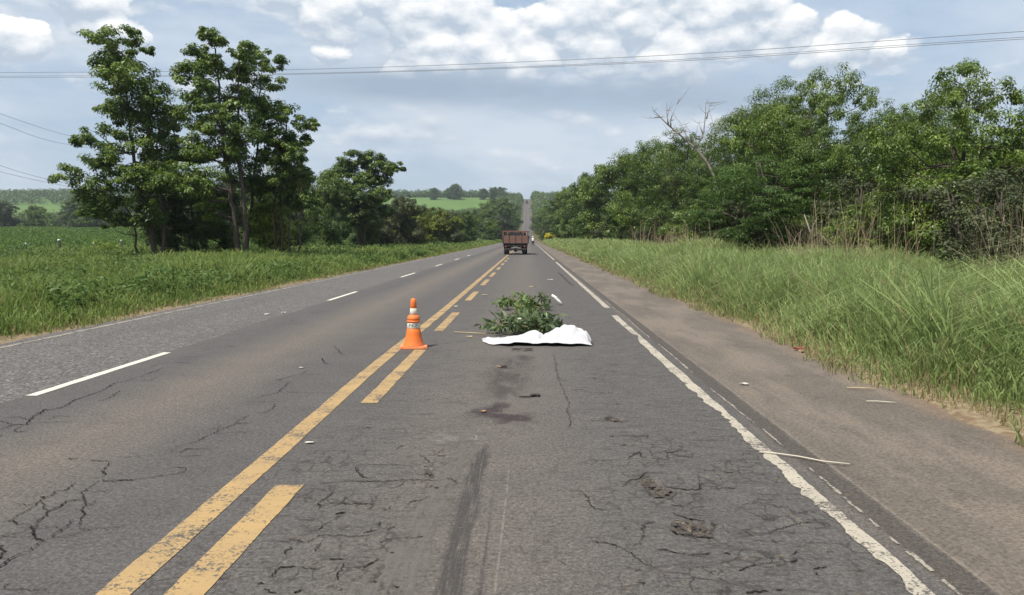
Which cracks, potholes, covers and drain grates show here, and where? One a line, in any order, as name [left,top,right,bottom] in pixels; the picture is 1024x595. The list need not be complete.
pothole [641,475,677,499]
pothole [670,520,713,537]
crack [554,355,603,427]
crack [258,445,456,593]
crack [592,420,688,485]
crack [0,371,329,566]
crack [592,472,832,585]
